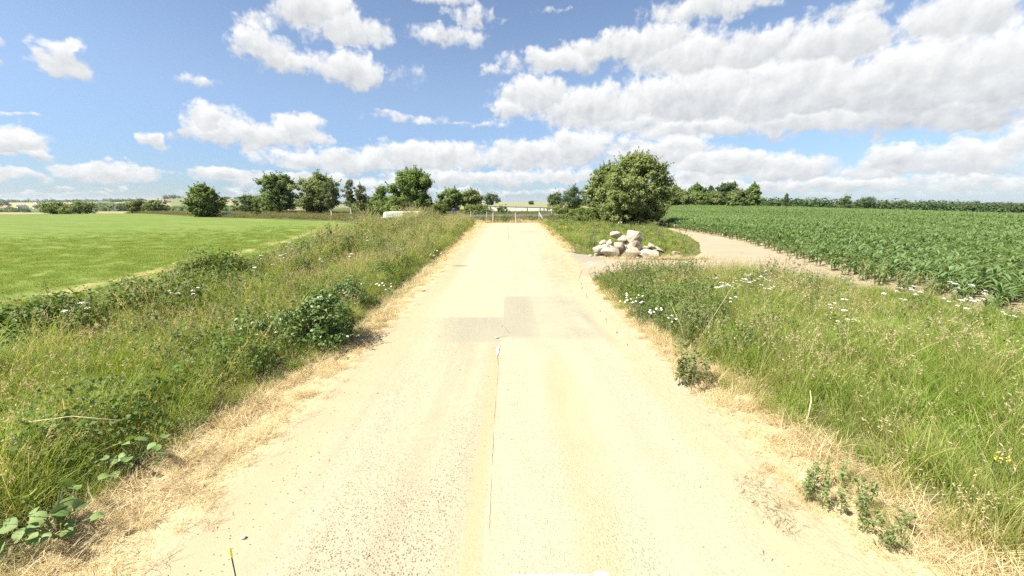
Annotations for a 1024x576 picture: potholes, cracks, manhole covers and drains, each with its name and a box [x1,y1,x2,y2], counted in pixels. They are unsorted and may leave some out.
crack [489,329,508,530]
